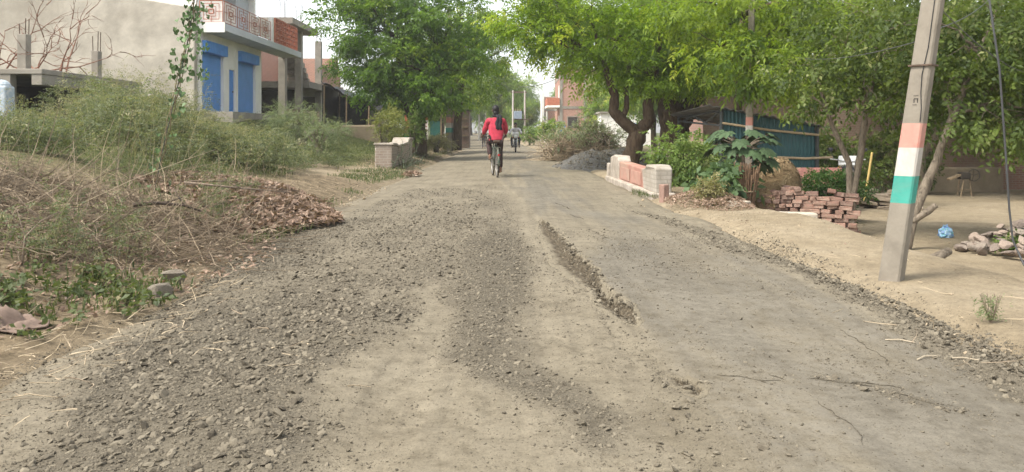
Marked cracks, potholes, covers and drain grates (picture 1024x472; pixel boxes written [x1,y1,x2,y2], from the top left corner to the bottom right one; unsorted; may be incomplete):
crack [809,329,946,409]
crack [818,403,862,442]
pothole [535,220,645,327]
